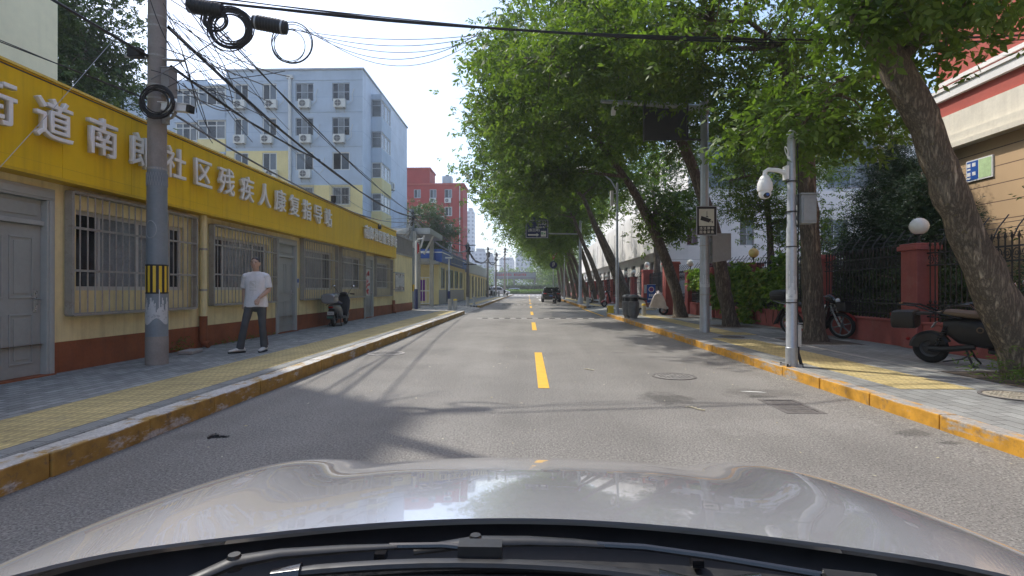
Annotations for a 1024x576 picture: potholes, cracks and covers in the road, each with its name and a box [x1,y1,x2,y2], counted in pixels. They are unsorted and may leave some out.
manhole cover [977,390,1024,401]
drain grate [757,399,827,414]
